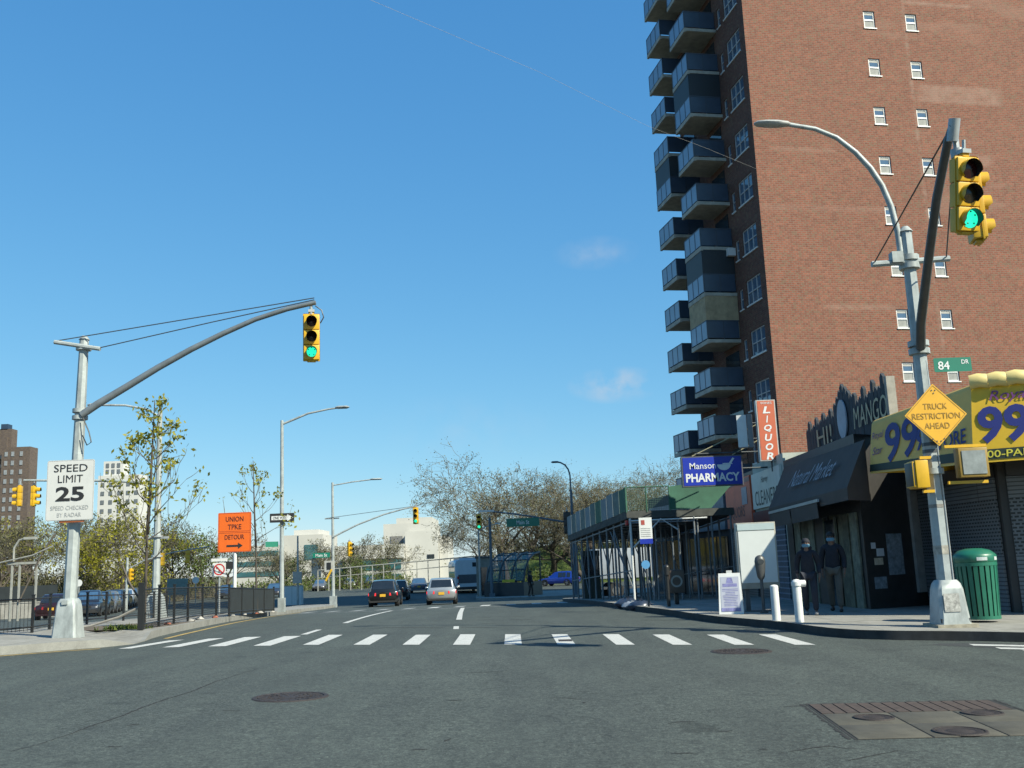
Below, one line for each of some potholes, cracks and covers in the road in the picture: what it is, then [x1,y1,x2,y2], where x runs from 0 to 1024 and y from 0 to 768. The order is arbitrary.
manhole cover [251,691,329,702]
manhole cover [931,726,990,736]
utility cover [799,699,1024,740]
